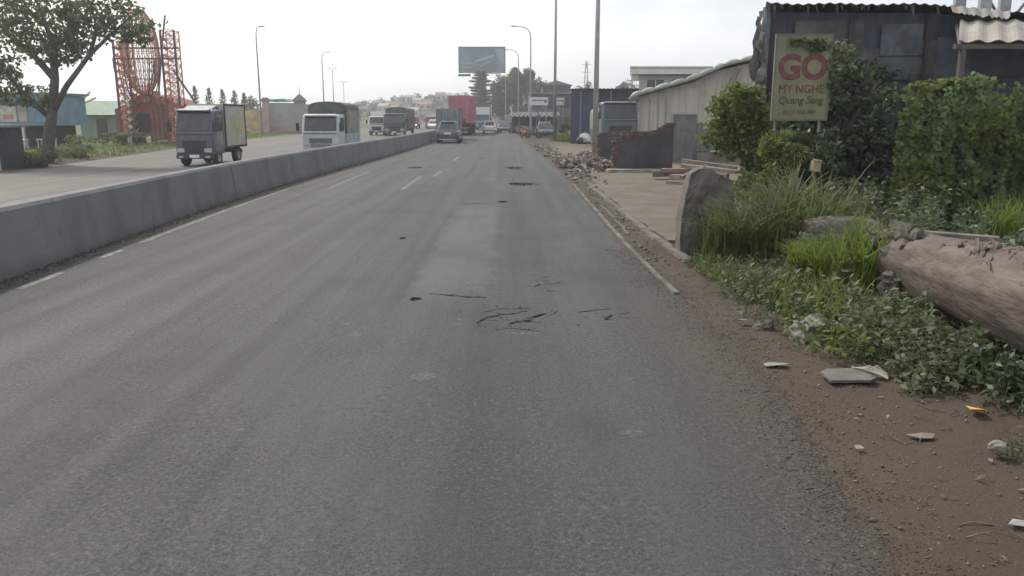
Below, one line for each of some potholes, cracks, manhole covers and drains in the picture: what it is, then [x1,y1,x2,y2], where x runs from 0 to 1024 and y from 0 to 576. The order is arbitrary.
crack [436,294,557,333]
crack [578,309,631,320]
